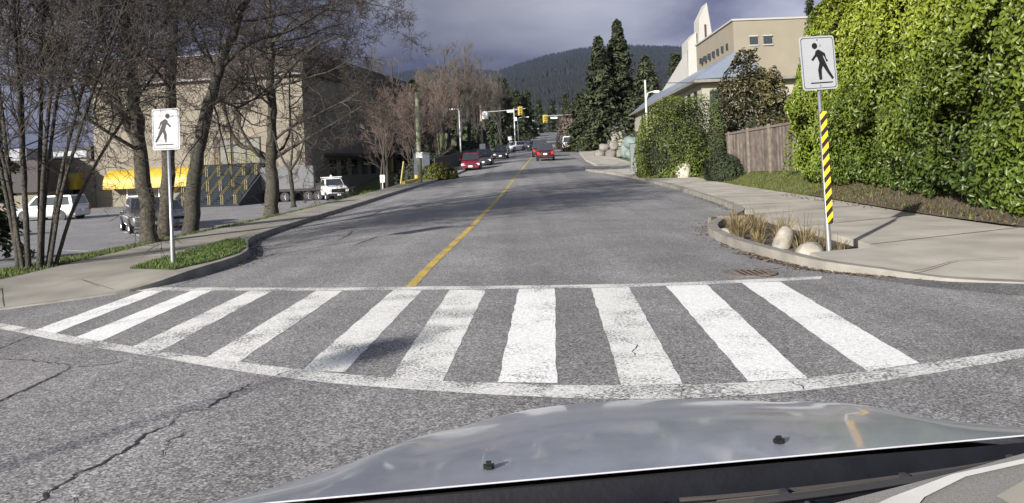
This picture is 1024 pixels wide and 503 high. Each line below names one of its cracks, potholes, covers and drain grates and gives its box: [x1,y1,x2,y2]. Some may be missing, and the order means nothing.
crack [0,335,124,401]
drain grate [722,268,777,277]
crack [36,383,249,503]
